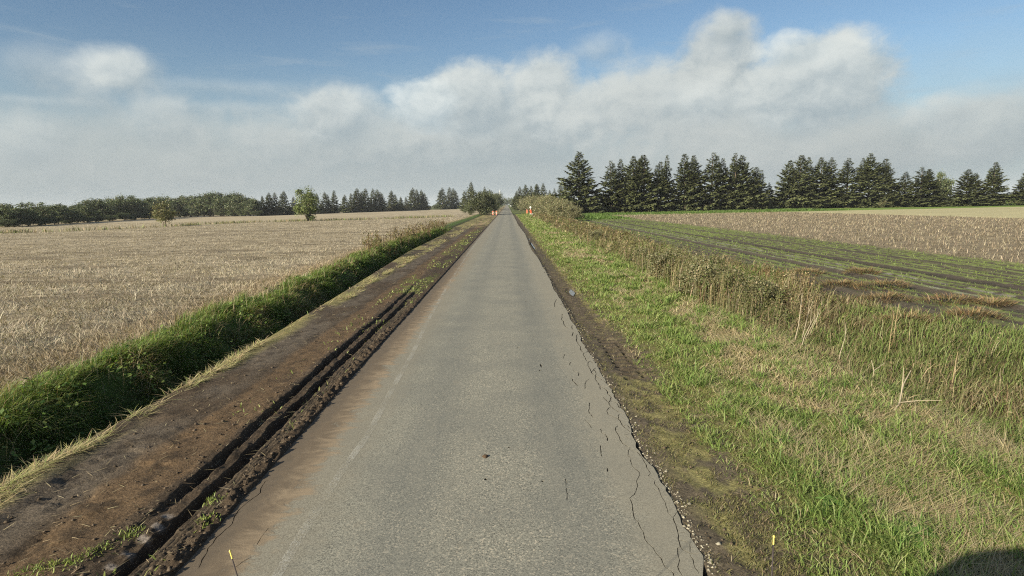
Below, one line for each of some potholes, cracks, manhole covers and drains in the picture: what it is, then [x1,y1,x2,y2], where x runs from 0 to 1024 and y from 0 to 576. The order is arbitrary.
crack [554,301,699,576]
